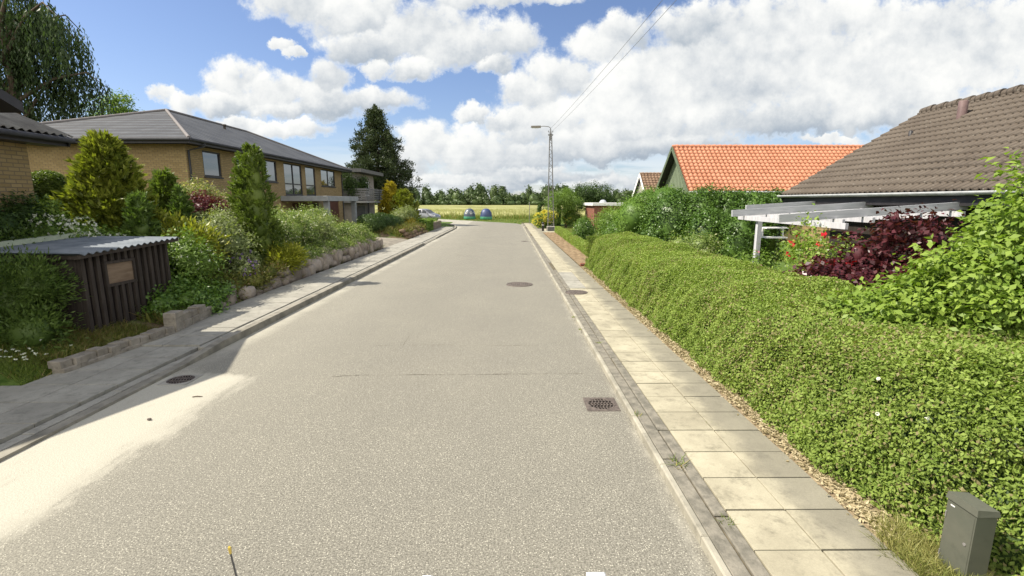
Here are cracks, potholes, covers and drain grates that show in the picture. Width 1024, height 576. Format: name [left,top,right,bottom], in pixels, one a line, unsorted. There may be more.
drain grate [583,397,621,411]
drain grate [157,375,203,385]
